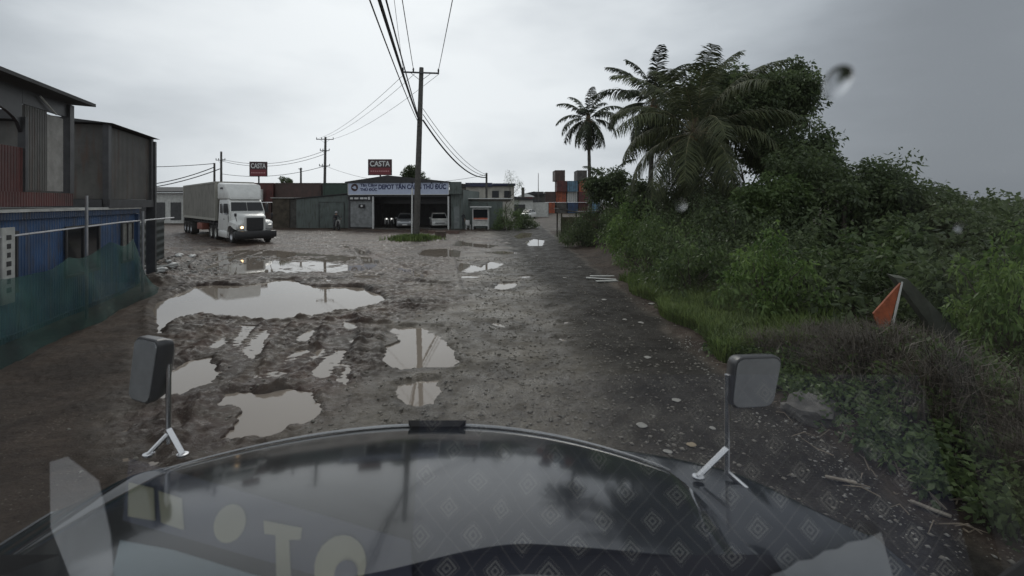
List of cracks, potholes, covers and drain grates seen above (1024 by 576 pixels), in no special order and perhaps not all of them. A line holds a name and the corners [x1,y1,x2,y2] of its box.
pothole [202,376,331,443]
pothole [186,248,381,276]
pothole [488,280,523,290]
pothole [285,321,326,343]
pothole [145,276,391,334]
pothole [372,321,467,372]
pothole [456,260,505,273]
pothole [161,348,228,398]
pothole [386,373,453,407]
pothole [415,248,462,258]
